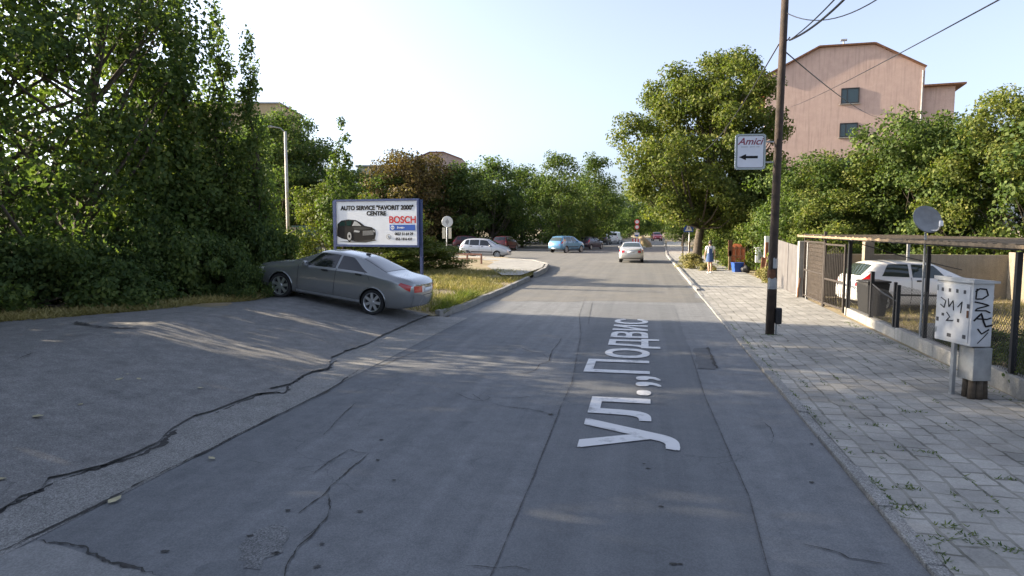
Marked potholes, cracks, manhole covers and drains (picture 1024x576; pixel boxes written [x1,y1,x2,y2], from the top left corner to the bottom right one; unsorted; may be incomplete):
crack [0,360,364,576]
crack [806,544,886,564]
